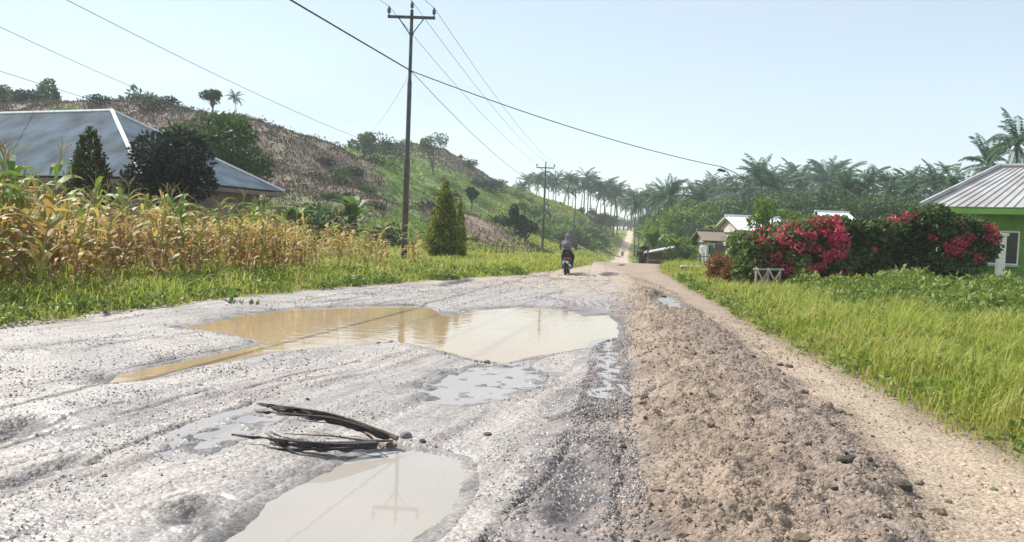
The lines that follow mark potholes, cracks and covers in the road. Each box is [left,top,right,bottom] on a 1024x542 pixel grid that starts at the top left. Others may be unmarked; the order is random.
pothole [405,363,550,407]
pothole [580,338,632,399]
pothole [98,305,626,384]
pothole [651,291,691,308]
pothole [154,406,289,461]
pothole [192,445,479,542]
